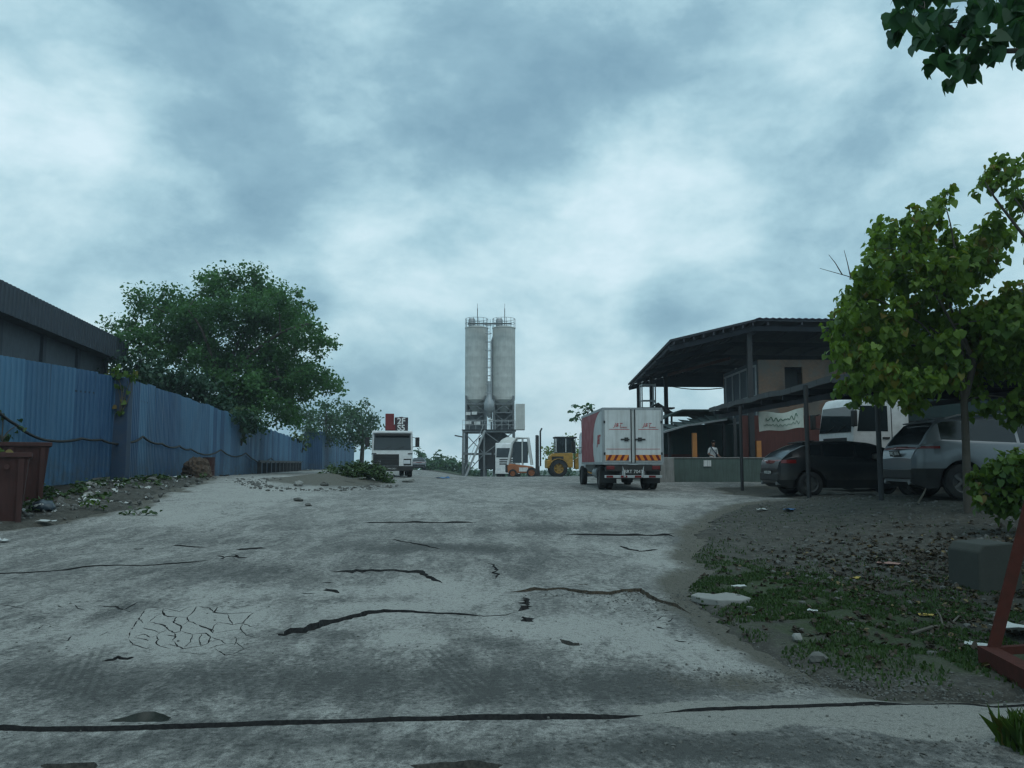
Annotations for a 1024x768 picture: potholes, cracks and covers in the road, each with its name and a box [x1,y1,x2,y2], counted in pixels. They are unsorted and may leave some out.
pothole [411,760,502,768]
crack [5,602,256,661]
crack [278,563,692,642]
crack [566,533,675,552]
crack [367,521,476,550]
pothole [107,711,171,722]
crack [0,545,263,574]
